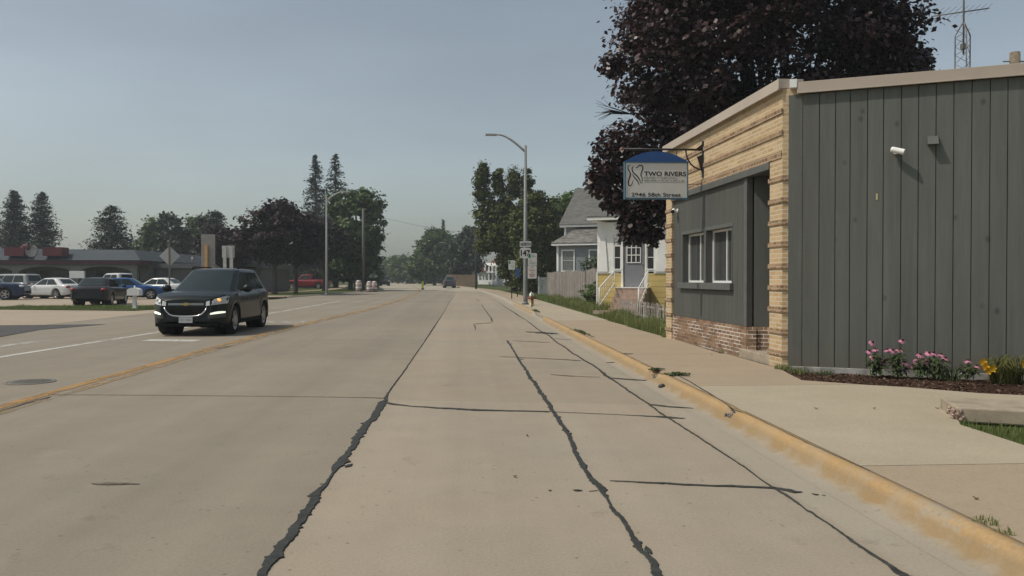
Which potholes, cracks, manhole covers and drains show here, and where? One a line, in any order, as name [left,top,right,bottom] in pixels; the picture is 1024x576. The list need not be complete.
crack [500,331,589,377]
crack [385,402,689,419]
